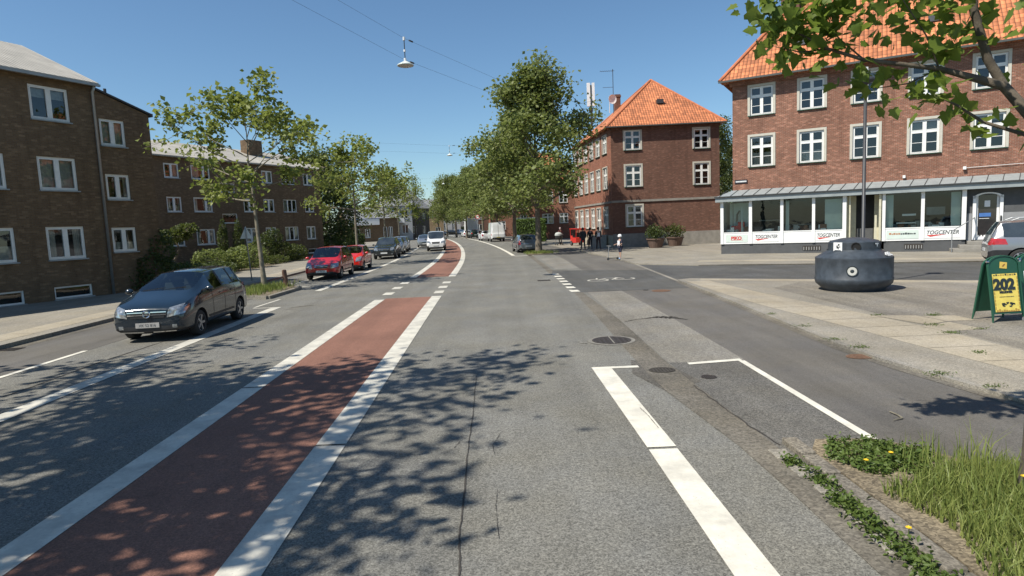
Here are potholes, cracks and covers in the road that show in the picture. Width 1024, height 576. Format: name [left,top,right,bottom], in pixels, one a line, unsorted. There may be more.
manhole cover [579,336,635,345]
crack [454,383,500,576]
